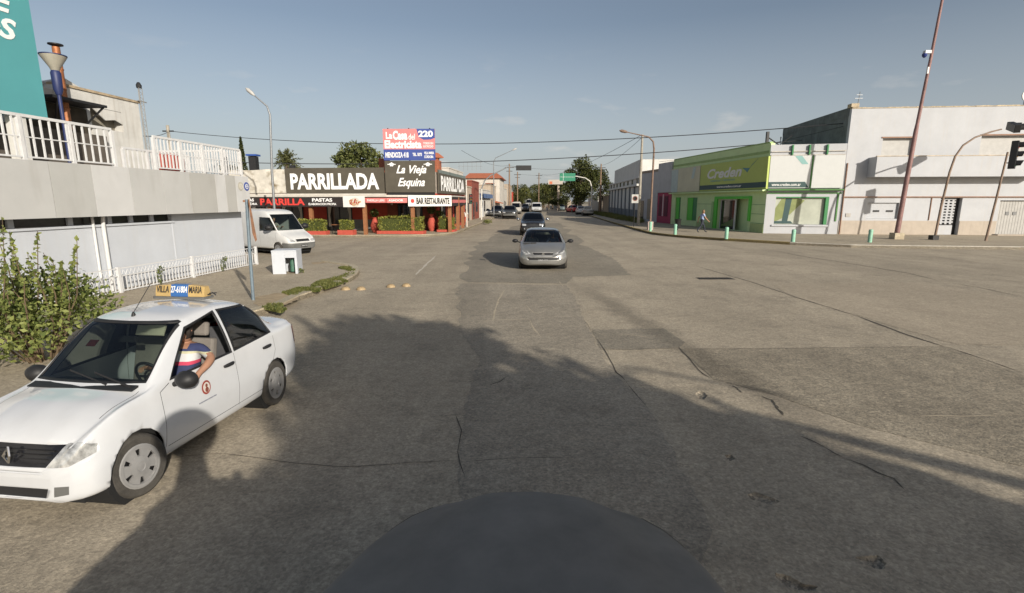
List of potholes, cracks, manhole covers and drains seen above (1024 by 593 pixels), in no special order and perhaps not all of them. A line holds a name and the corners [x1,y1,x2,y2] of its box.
pothole [748,492,780,505]
pothole [775,573,818,591]
crack [804,437,905,490]
crack [584,318,650,408]
pothole [856,555,887,569]
